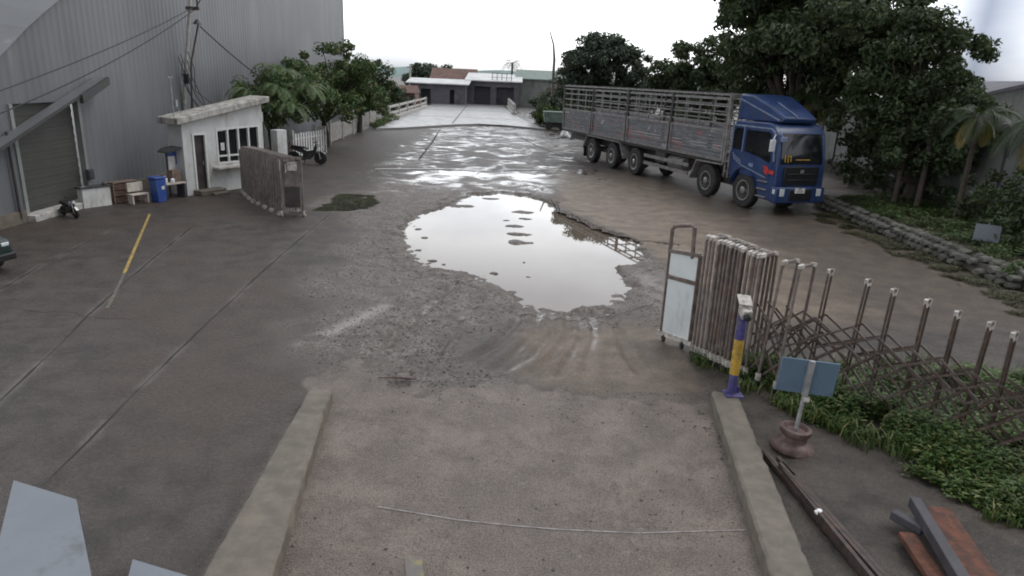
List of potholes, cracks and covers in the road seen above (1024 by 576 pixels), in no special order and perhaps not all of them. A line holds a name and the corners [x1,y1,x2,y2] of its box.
pothole [381,189,666,321]
